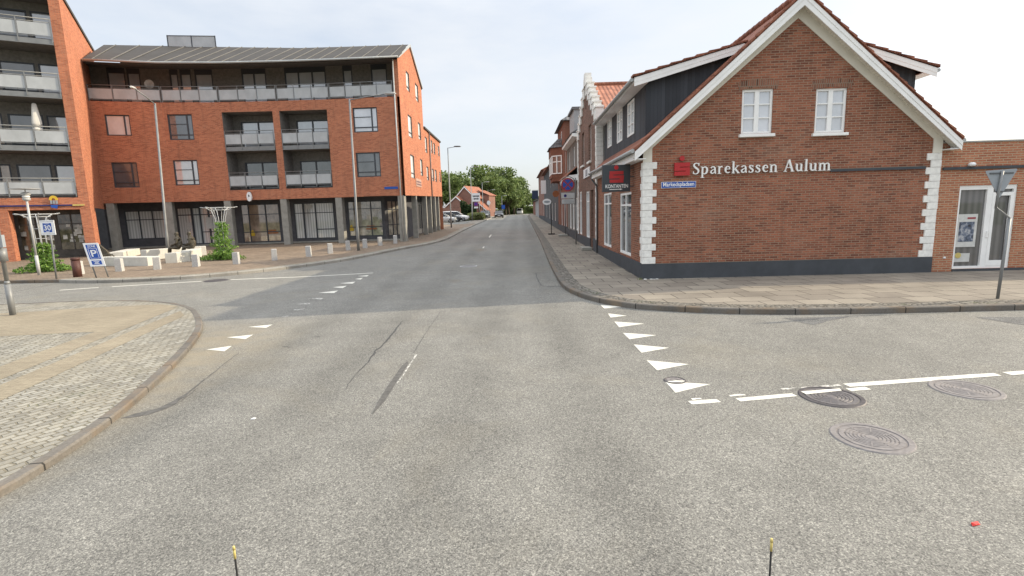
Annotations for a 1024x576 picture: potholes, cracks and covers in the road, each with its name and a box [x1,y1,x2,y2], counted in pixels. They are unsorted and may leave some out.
crack [347,323,401,387]
manhole cover [829,422,917,455]
manhole cover [797,386,867,408]
manhole cover [927,379,1007,401]
